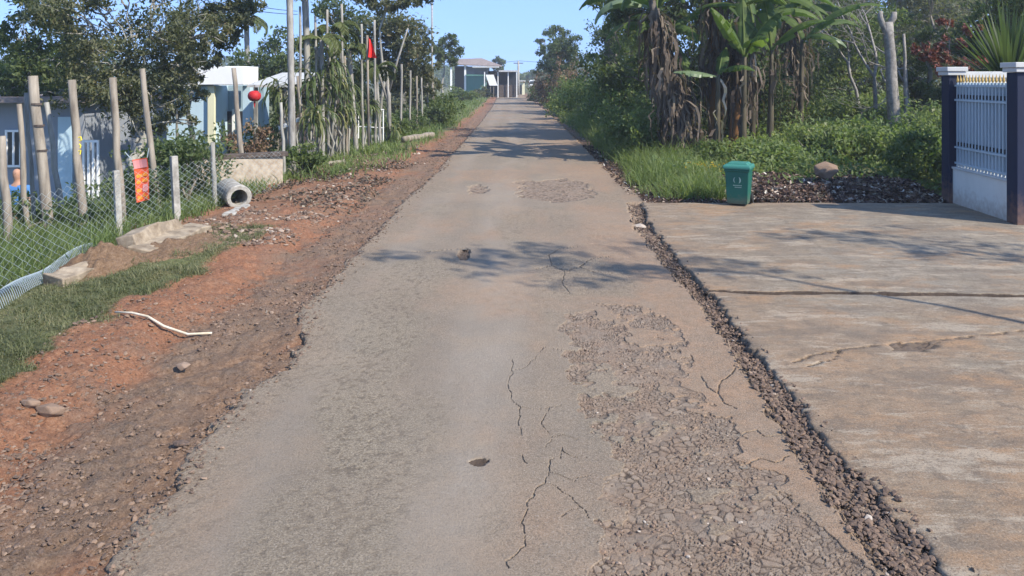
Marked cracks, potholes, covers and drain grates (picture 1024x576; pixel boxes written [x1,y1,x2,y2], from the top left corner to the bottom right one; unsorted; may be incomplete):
crack [792,330,1023,367]
crack [535,247,606,294]
crack [505,448,588,569]
